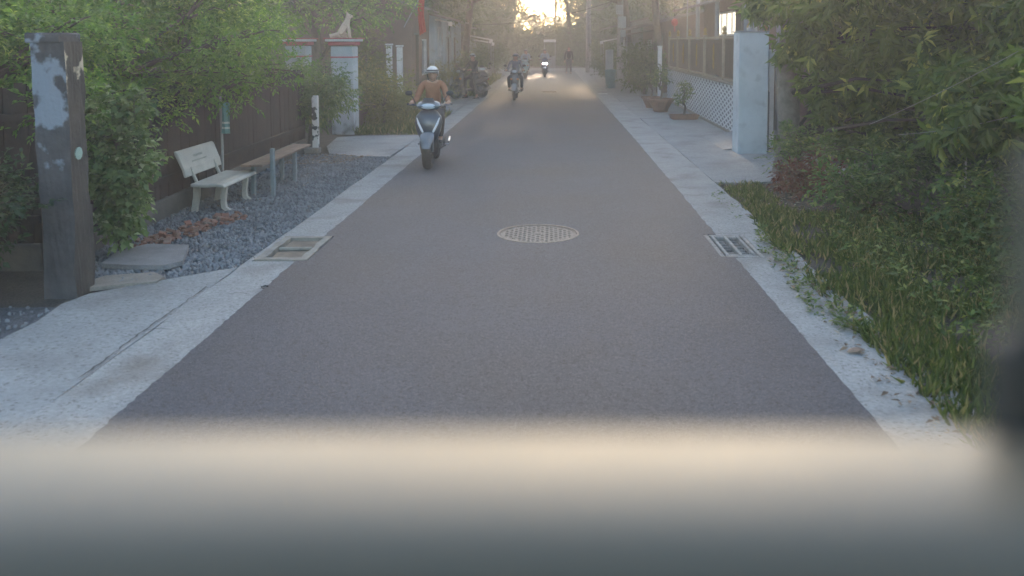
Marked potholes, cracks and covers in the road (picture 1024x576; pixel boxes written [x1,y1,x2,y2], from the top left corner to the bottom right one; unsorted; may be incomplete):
manhole cover [497,224,579,243]
drain grate [704,235,766,258]
